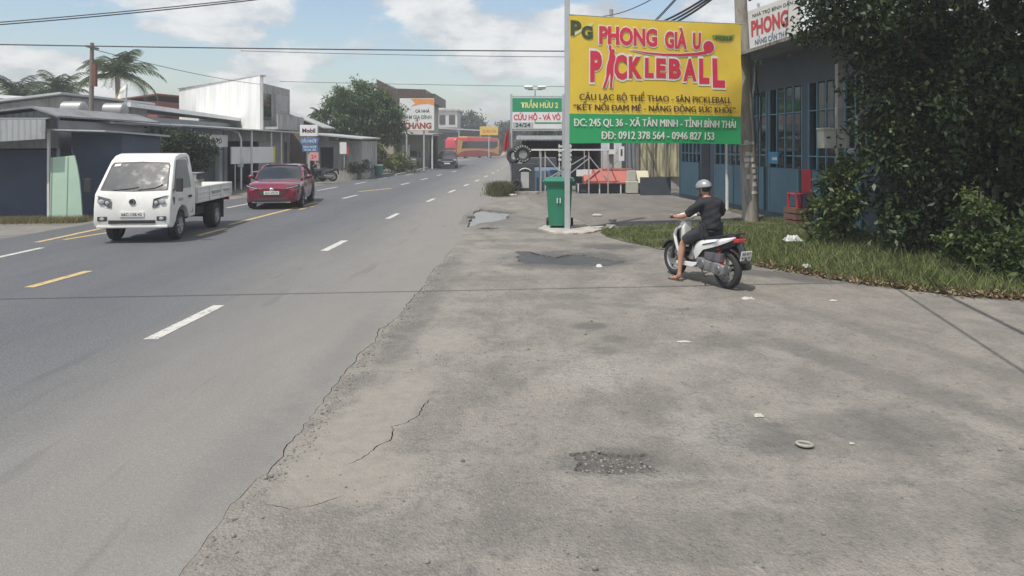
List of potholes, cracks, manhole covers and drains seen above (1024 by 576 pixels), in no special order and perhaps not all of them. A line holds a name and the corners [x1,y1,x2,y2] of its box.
pothole [563,450,667,476]
pothole [466,209,518,227]
crack [179,241,459,576]
